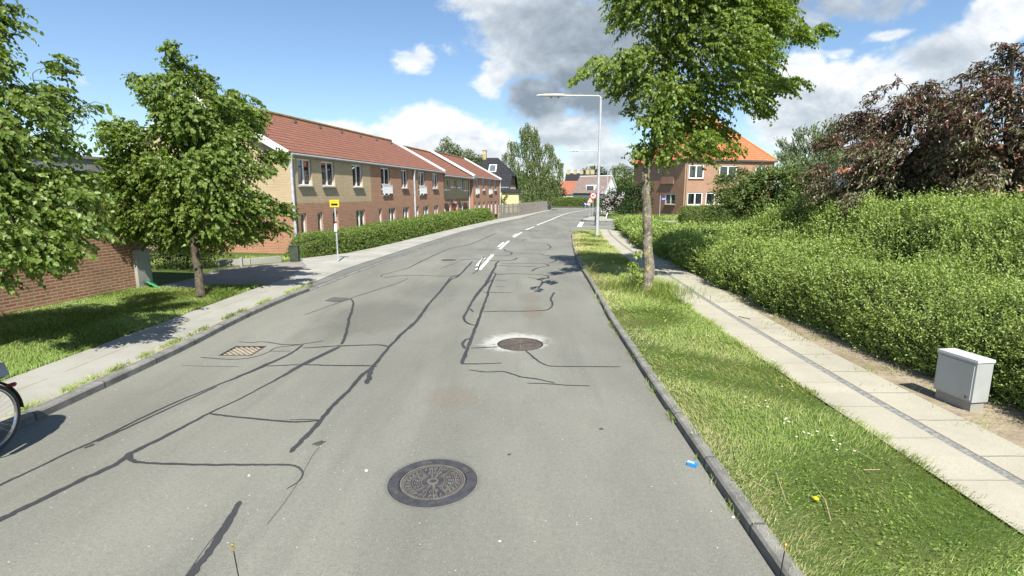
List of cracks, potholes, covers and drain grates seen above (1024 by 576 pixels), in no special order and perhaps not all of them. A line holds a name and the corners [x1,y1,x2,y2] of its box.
manhole cover [497,338,543,351]
manhole cover [388,459,477,507]
drain grate [218,346,266,356]
